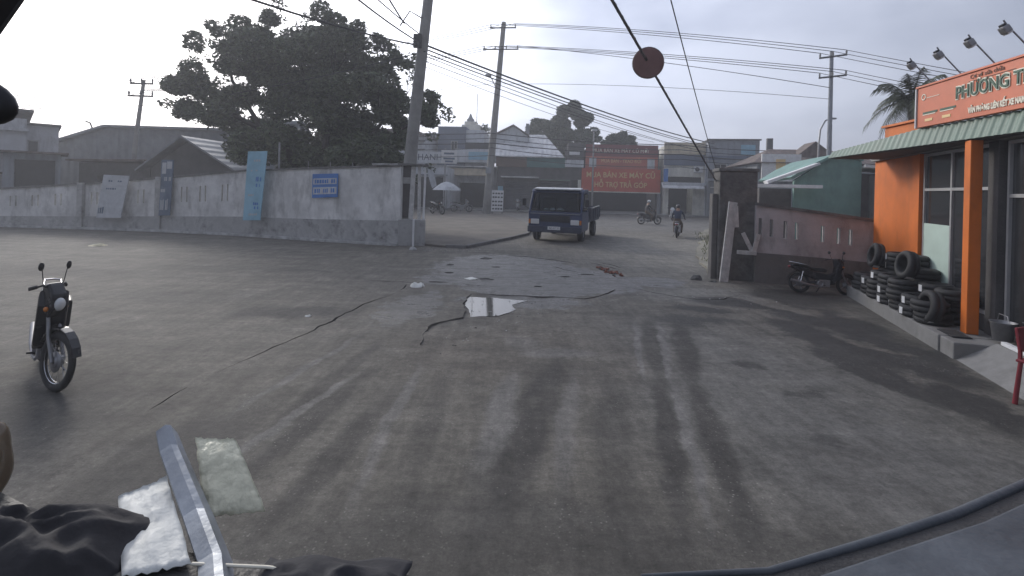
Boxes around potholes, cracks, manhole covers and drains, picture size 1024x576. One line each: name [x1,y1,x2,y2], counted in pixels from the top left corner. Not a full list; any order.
crack [218,280,418,372]
